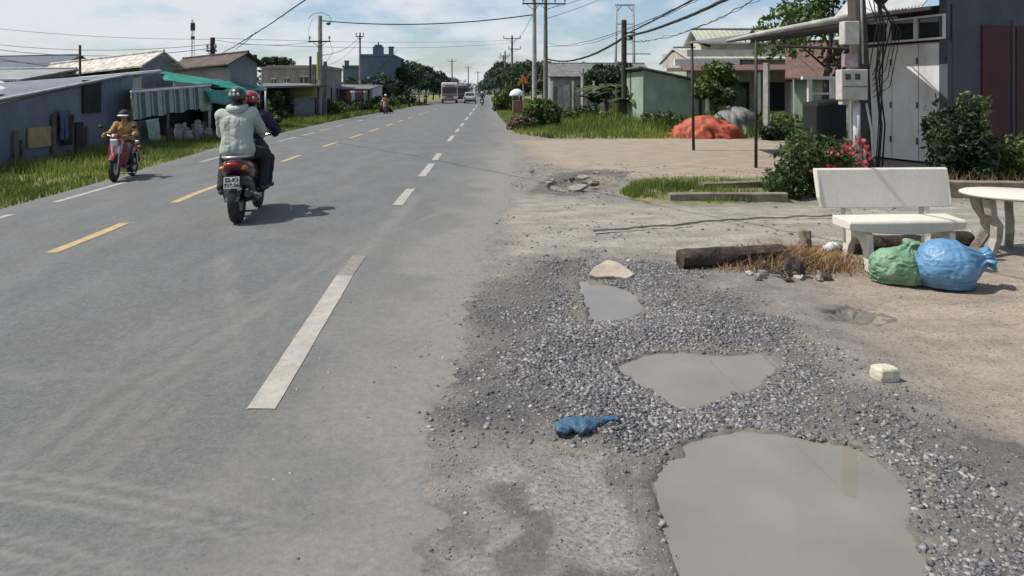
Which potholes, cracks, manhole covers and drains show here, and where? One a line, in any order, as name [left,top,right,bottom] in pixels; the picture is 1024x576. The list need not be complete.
crack [593,214,832,233]
pothole [541,174,624,193]
pothole [811,304,898,327]
pothole [601,345,792,417]
pothole [629,422,966,576]
pothole [570,277,657,324]
